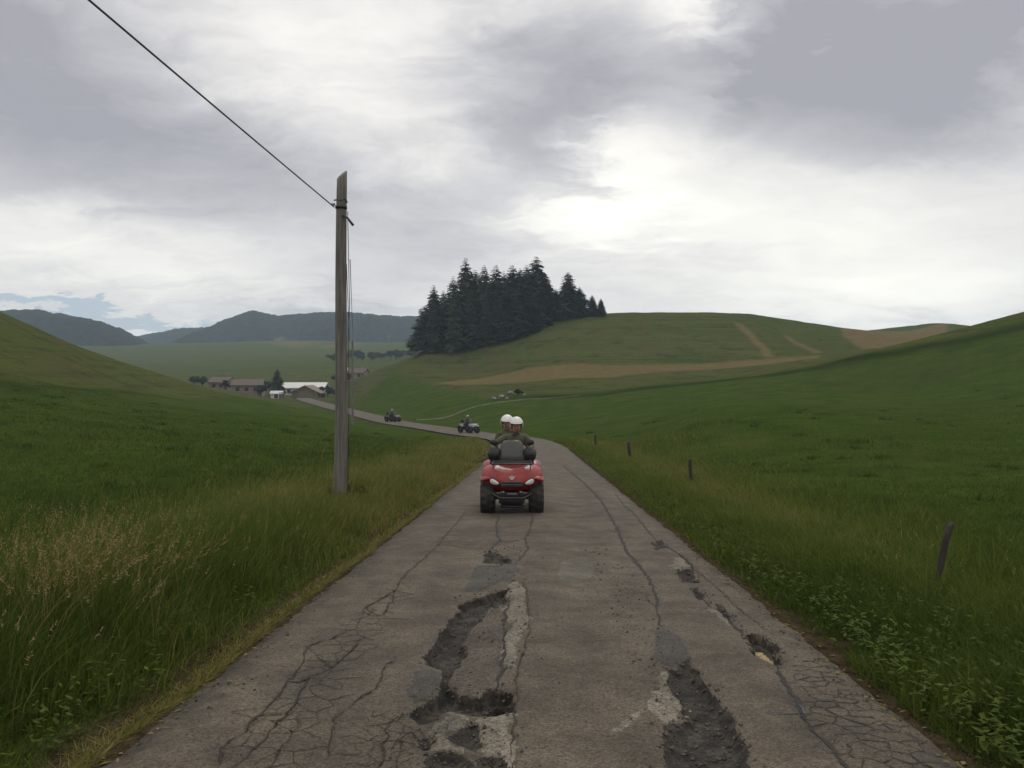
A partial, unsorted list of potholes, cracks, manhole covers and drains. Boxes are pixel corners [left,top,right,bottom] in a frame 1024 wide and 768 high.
pothole [482,552,512,564]
pothole [475,756,510,768]
crack [218,512,474,768]
crack [776,660,953,768]
pothole [662,658,750,768]
crack [491,515,534,561]
pothole [423,751,477,768]
pothole [409,589,516,725]
pothole [446,722,481,752]
pothole [746,633,783,666]
pothole [677,569,700,583]
